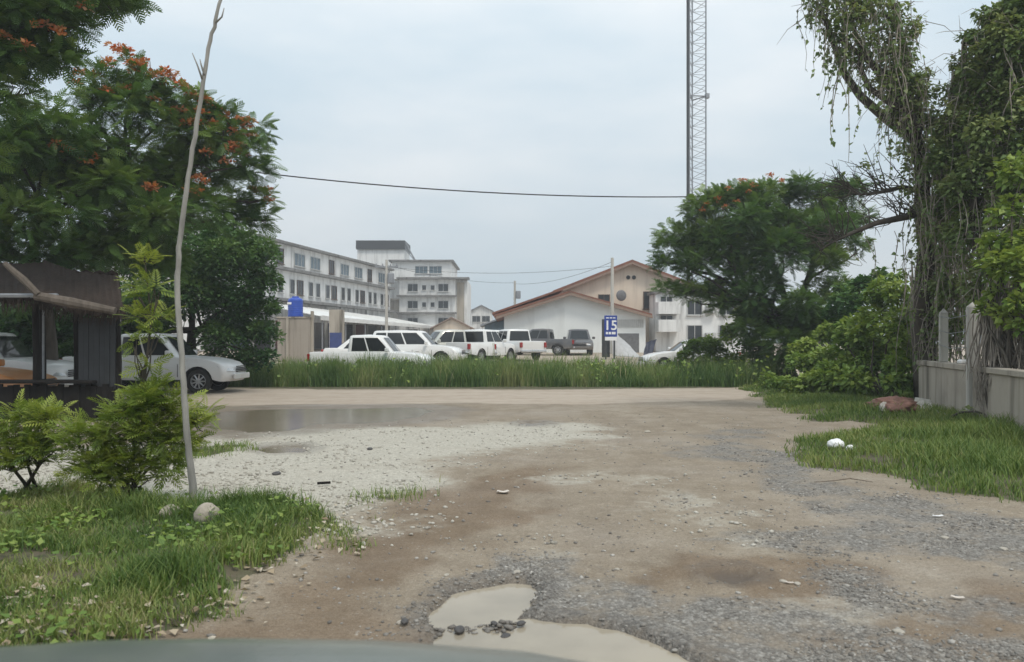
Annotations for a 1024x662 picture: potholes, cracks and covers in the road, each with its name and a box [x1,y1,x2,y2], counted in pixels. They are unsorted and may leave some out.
pothole [247,442,316,453]
pothole [415,574,711,662]
